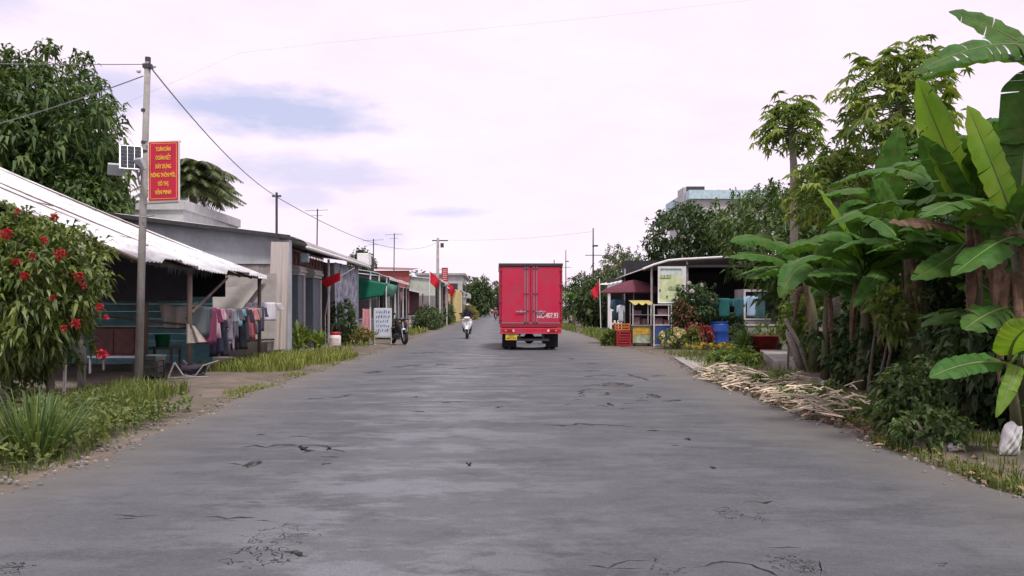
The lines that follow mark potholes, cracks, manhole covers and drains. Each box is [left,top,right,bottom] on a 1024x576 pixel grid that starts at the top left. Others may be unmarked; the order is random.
crack [230,434,345,465]
crack [0,562,36,575]
crack [210,502,321,569]
crack [588,547,827,576]
crack [554,363,665,427]
crack [713,501,772,522]
